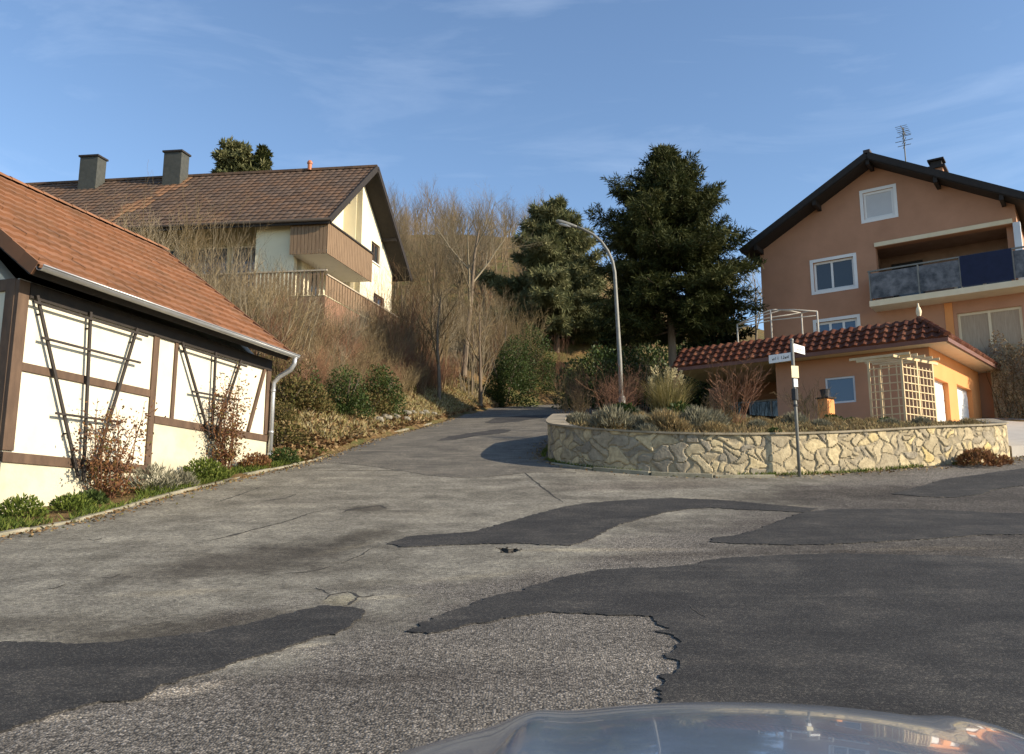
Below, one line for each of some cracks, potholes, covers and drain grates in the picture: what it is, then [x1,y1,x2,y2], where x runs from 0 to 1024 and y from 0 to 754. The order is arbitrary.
crack [293,548,373,606]
crack [198,486,324,543]
